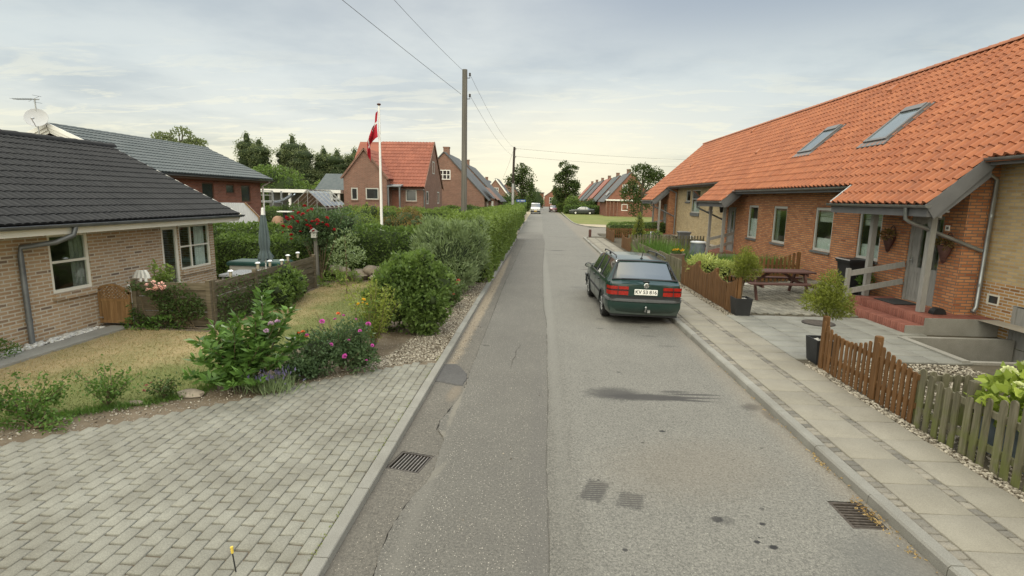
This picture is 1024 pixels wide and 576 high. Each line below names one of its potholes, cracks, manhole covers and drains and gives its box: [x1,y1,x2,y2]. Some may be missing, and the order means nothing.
drain grate [828,502,887,530]
drain grate [386,452,433,474]
manhole cover [801,319,836,327]
